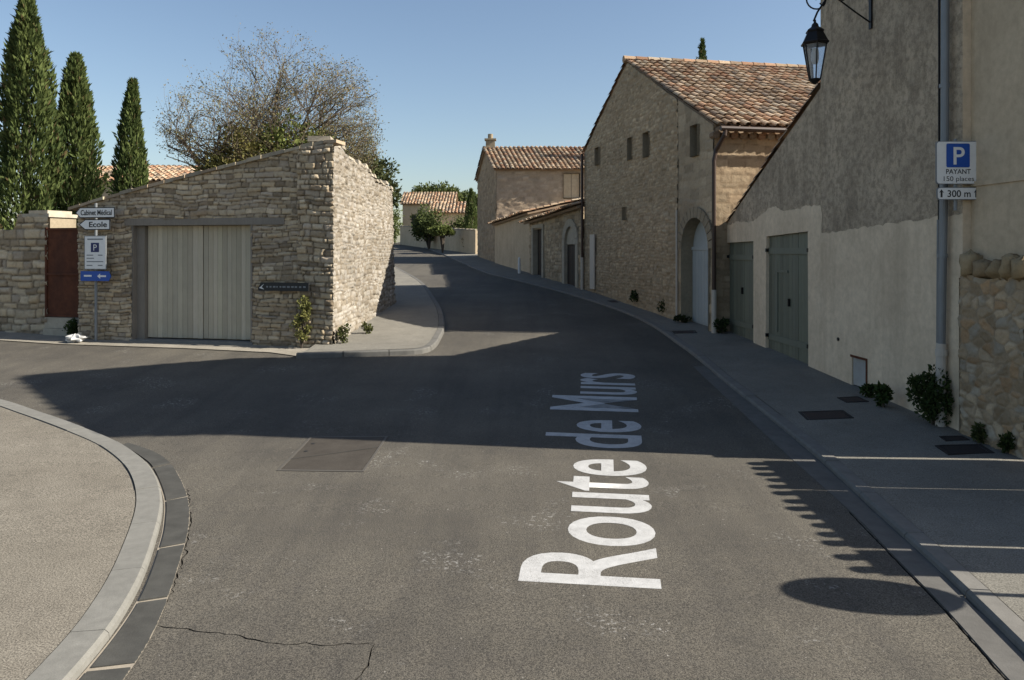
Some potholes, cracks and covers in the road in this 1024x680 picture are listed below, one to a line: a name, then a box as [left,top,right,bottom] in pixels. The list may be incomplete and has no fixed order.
manhole cover [276,436,388,472]
manhole cover [798,410,854,420]
crack [158,625,374,680]
manhole cover [935,444,995,455]
crack [167,490,192,602]
